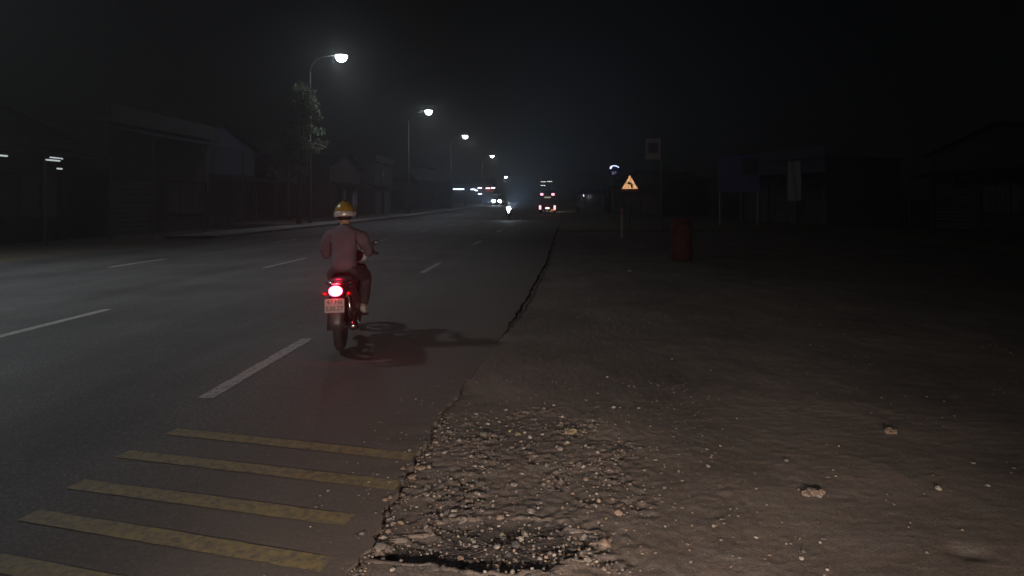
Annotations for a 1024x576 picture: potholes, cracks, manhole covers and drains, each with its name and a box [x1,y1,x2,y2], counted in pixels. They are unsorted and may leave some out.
crack [509,237,556,328]
pothole [363,515,613,576]
